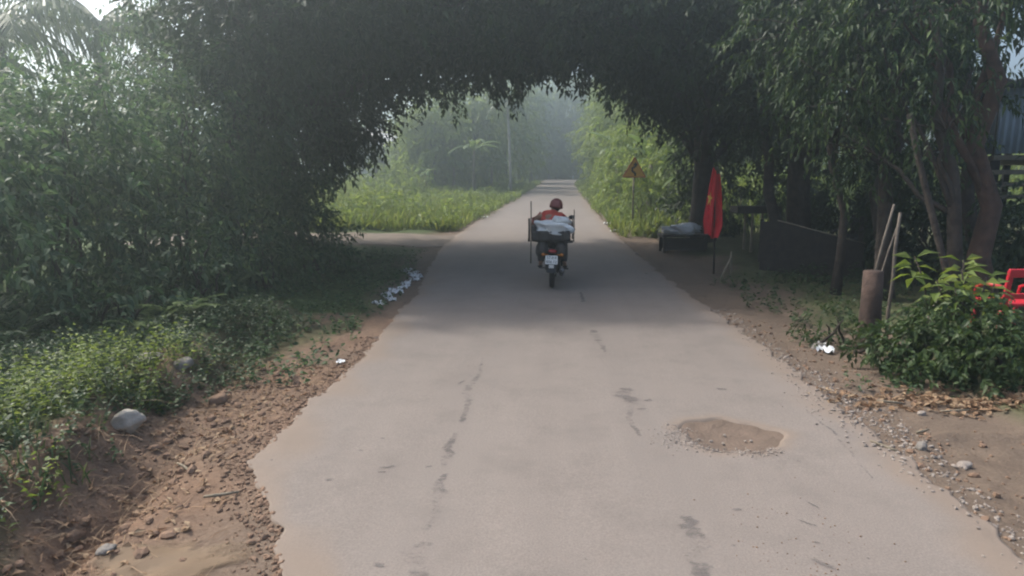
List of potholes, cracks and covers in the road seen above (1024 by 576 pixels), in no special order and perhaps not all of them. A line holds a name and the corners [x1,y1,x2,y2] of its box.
pothole [680,419,784,453]
